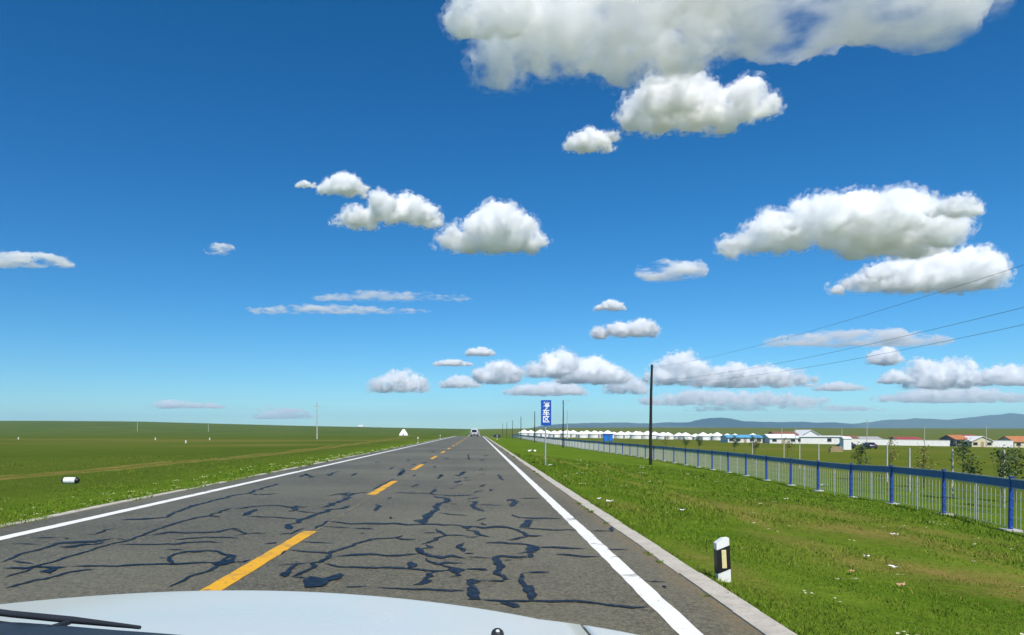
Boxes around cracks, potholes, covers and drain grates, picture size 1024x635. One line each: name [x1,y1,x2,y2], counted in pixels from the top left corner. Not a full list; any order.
crack [12,505,573,550]
crack [560,549,624,557]
